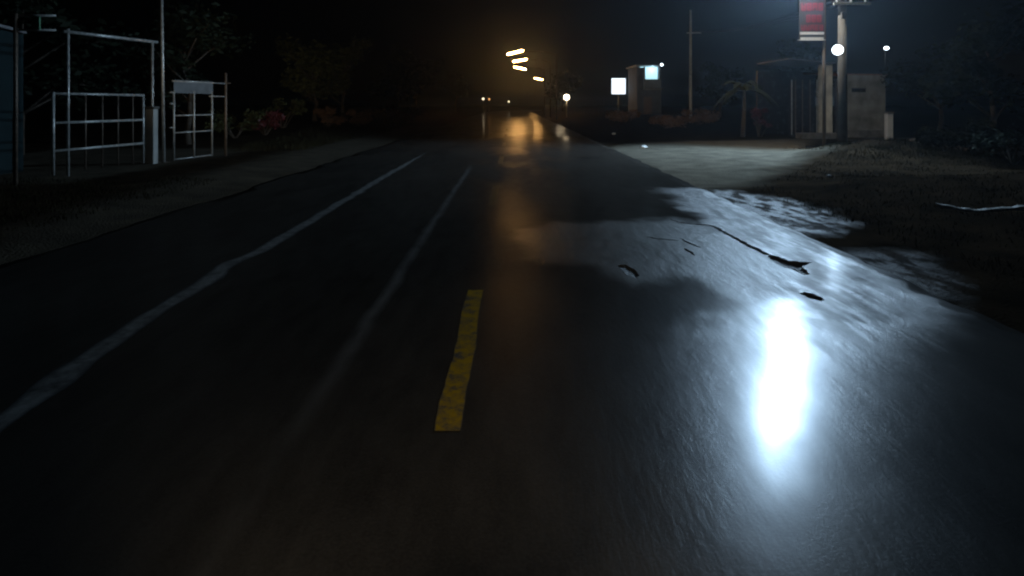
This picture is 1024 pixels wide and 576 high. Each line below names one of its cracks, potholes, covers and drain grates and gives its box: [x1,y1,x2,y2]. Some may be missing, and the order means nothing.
pothole [618,264,639,278]
pothole [800,292,824,301]
crack [650,219,770,255]
